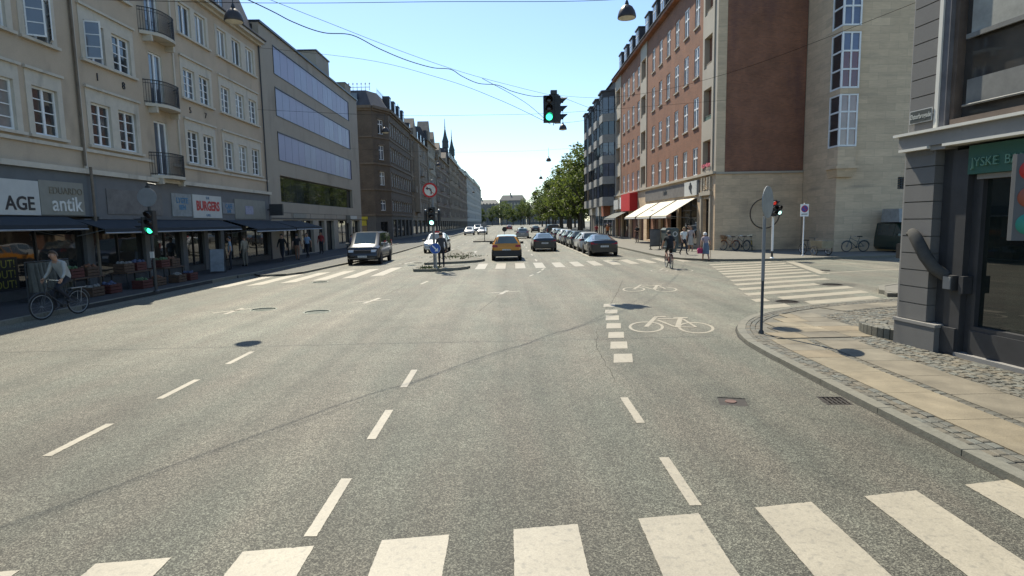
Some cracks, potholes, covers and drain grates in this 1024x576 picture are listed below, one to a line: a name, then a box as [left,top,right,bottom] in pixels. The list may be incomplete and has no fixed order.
utility cover [718,398,748,406]
drain grate [816,396,854,405]
